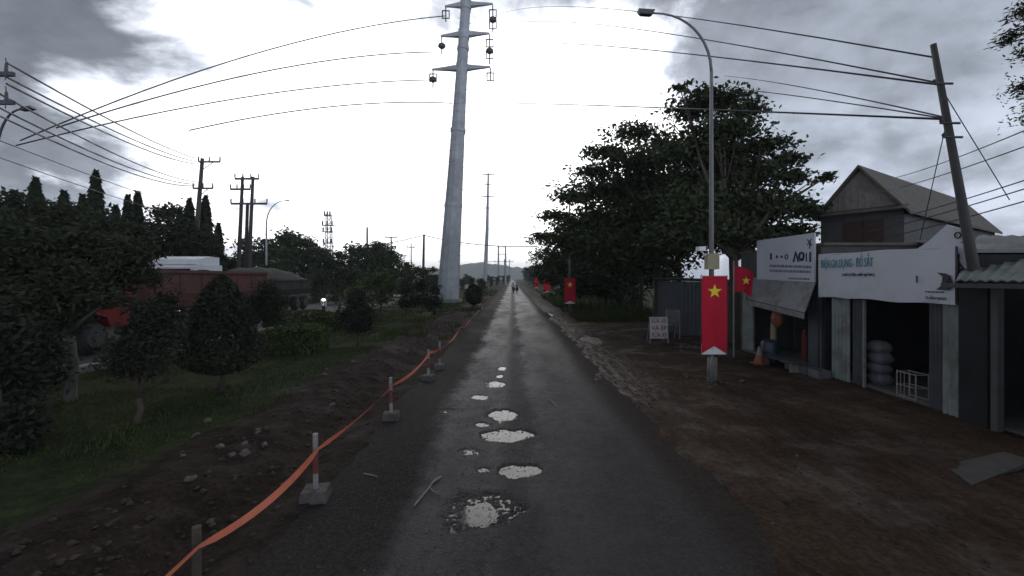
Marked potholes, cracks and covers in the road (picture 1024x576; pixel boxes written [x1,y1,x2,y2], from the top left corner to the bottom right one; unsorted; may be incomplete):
pothole [456,446,487,456]
pothole [496,462,547,479]
pothole [478,427,539,443]
pothole [485,408,521,423]
pothole [483,380,508,388]
pothole [436,488,533,538]
